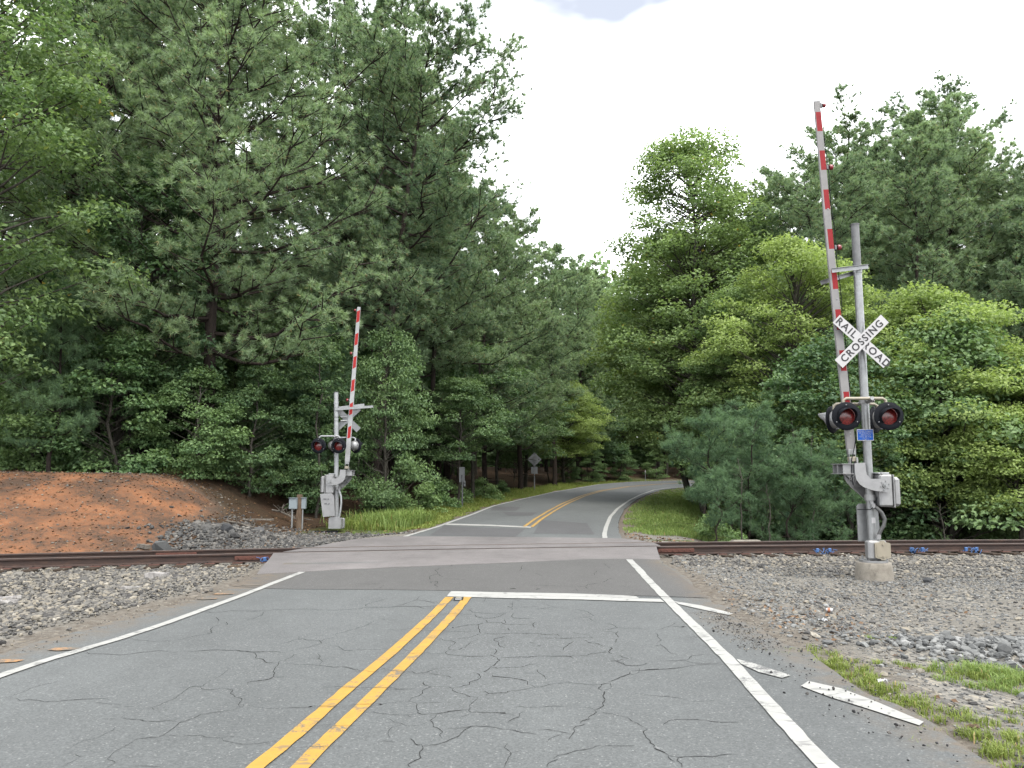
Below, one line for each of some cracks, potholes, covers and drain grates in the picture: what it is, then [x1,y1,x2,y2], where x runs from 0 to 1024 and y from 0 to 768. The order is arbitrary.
crack [16,569,737,767]
